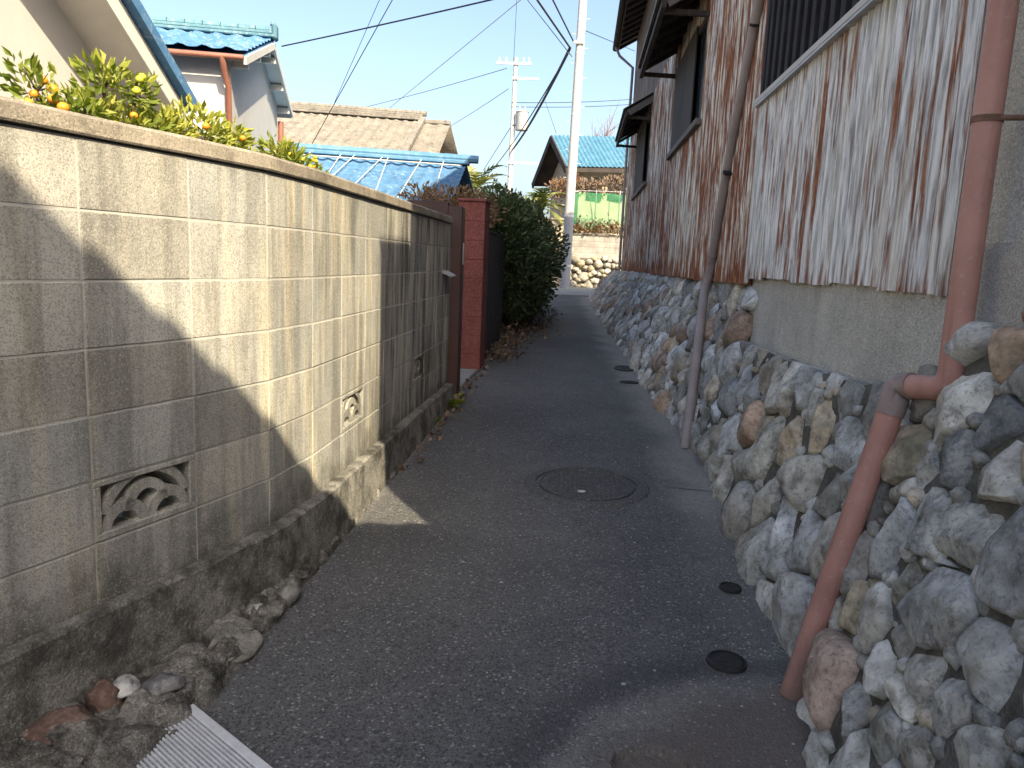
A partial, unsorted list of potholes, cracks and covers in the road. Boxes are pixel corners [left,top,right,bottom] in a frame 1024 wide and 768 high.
drain grate [136,704,272,768]
utility cover [719,582,742,594]
manhole cover [524,465,650,508]
utility cover [706,650,747,674]
